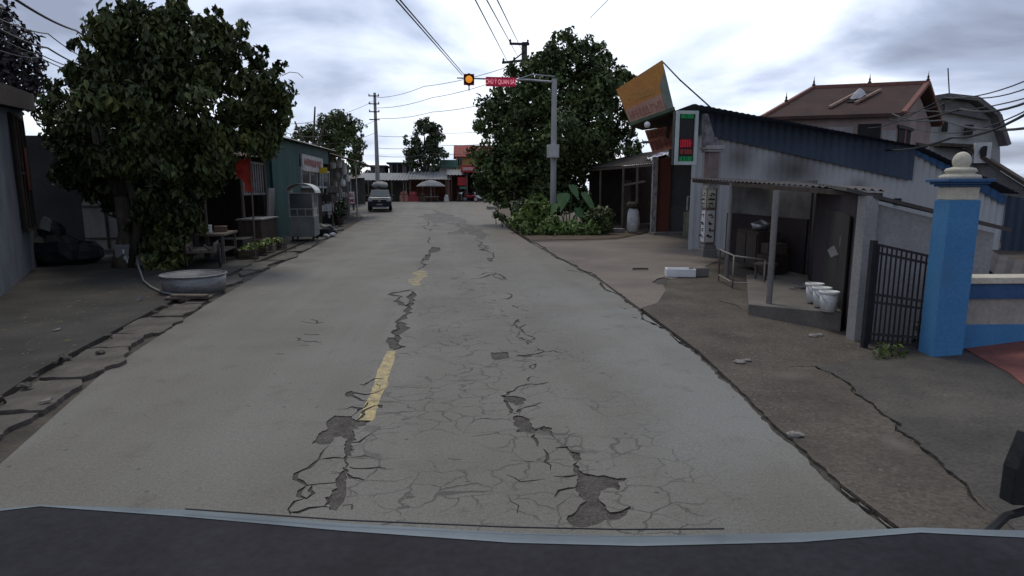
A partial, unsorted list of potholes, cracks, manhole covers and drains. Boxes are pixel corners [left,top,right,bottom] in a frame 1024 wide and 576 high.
pothole [503,396,526,405]
pothole [312,416,371,456]
pothole [567,452,633,527]
pothole [328,467,349,511]
crack [387,240,581,514]
crack [296,319,321,343]
pothole [513,415,537,433]
crack [287,378,387,515]
